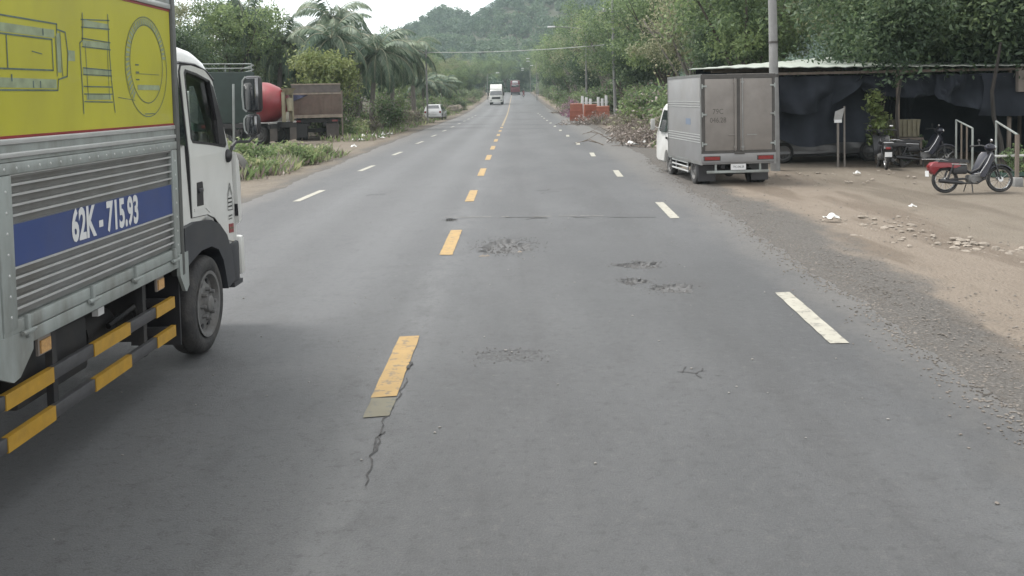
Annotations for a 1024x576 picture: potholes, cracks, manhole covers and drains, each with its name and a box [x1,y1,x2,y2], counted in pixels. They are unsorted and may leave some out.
crack [365,361,413,485]
pothole [463,236,552,259]
pothole [642,280,709,295]
pothole [462,347,558,366]
pothole [608,259,680,271]
pothole [614,276,655,286]
